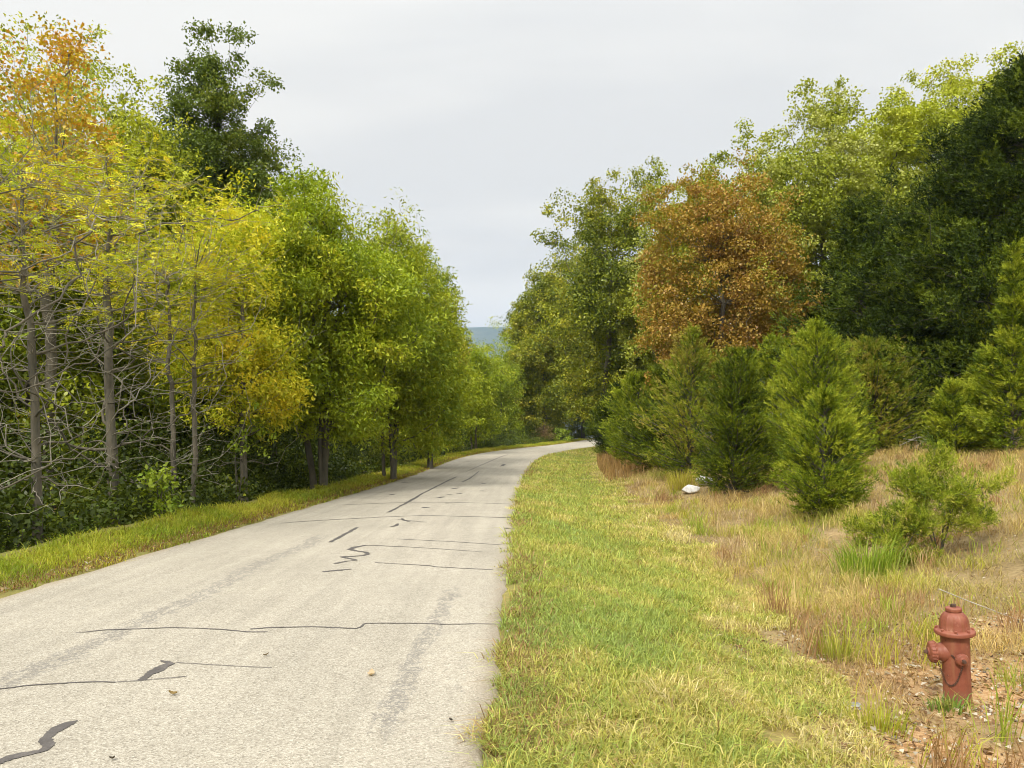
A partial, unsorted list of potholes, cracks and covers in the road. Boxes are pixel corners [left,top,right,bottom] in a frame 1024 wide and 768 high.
crack [0,660,272,689]
crack [76,623,491,633]
crack [287,471,511,572]
